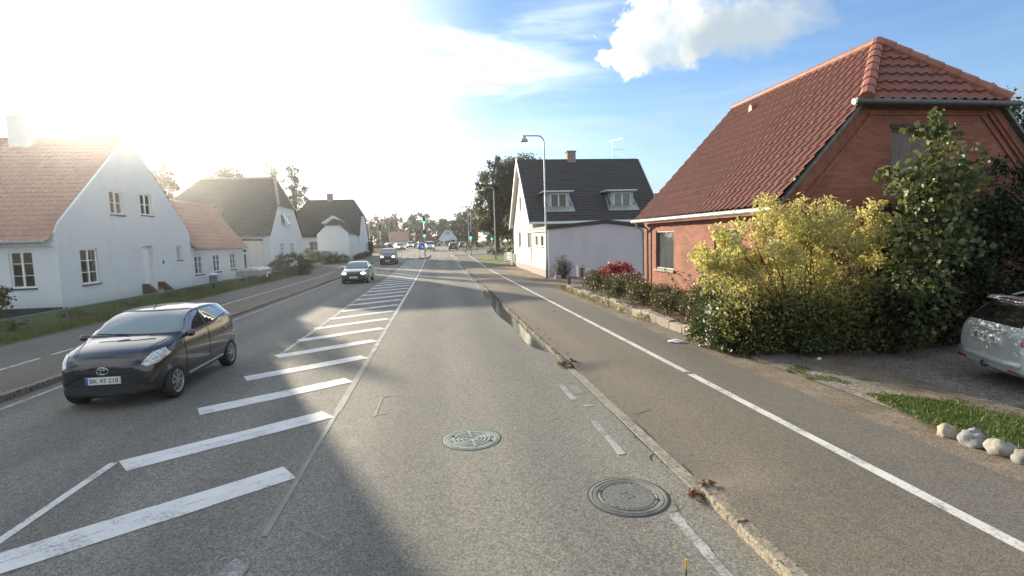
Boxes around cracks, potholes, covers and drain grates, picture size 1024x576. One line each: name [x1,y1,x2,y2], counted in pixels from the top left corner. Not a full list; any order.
manhole cover [587,478,671,518]
manhole cover [442,428,502,451]
